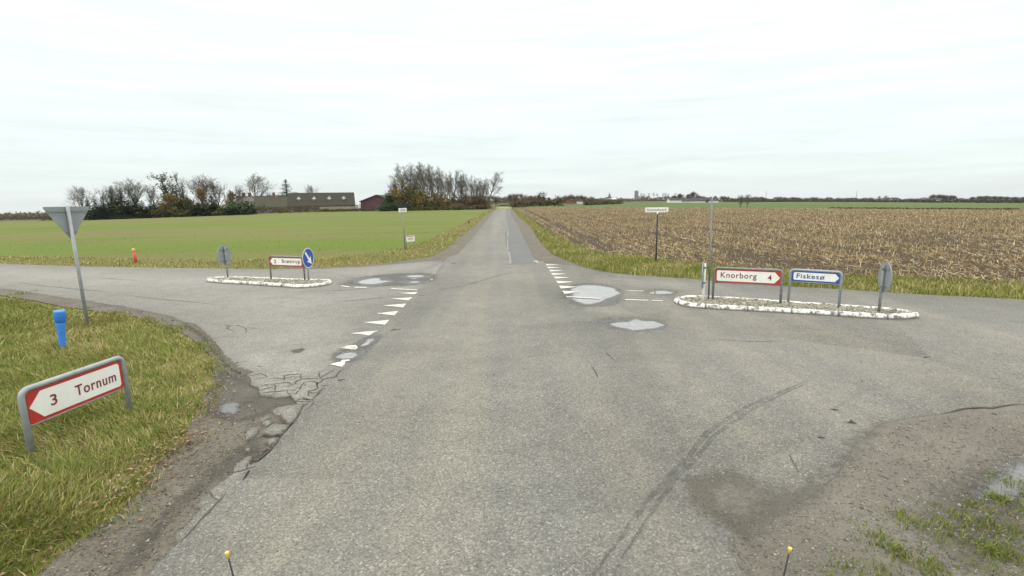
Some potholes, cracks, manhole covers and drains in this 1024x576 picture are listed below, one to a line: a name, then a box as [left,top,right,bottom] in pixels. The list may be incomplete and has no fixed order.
crack [241,361,343,438]
crack [945,403,1024,413]
